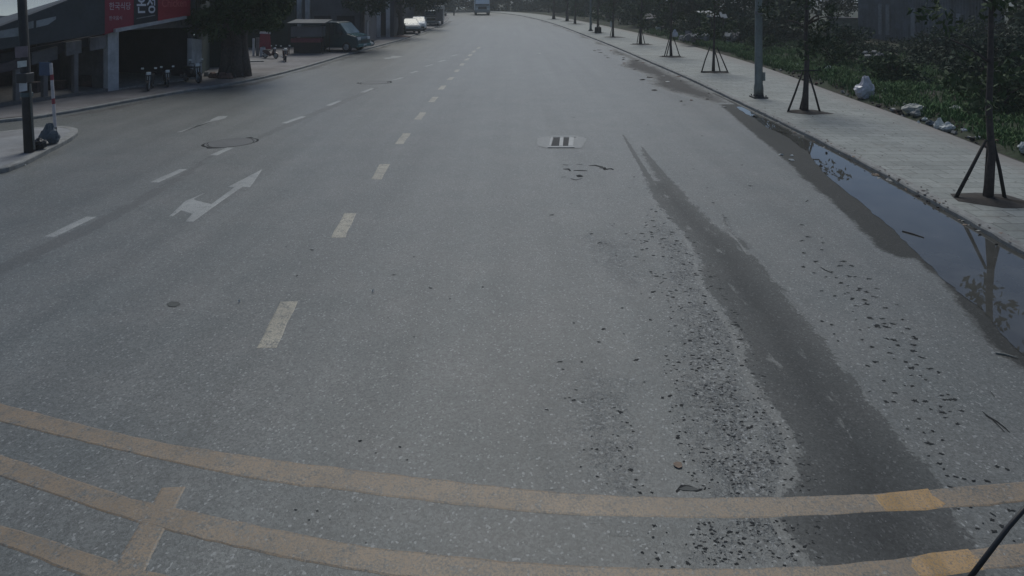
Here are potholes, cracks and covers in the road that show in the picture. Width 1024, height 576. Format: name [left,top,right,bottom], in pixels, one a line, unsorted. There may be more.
manhole cover [201,138,259,147]
crack [563,164,614,180]
drain grate [537,136,587,149]
